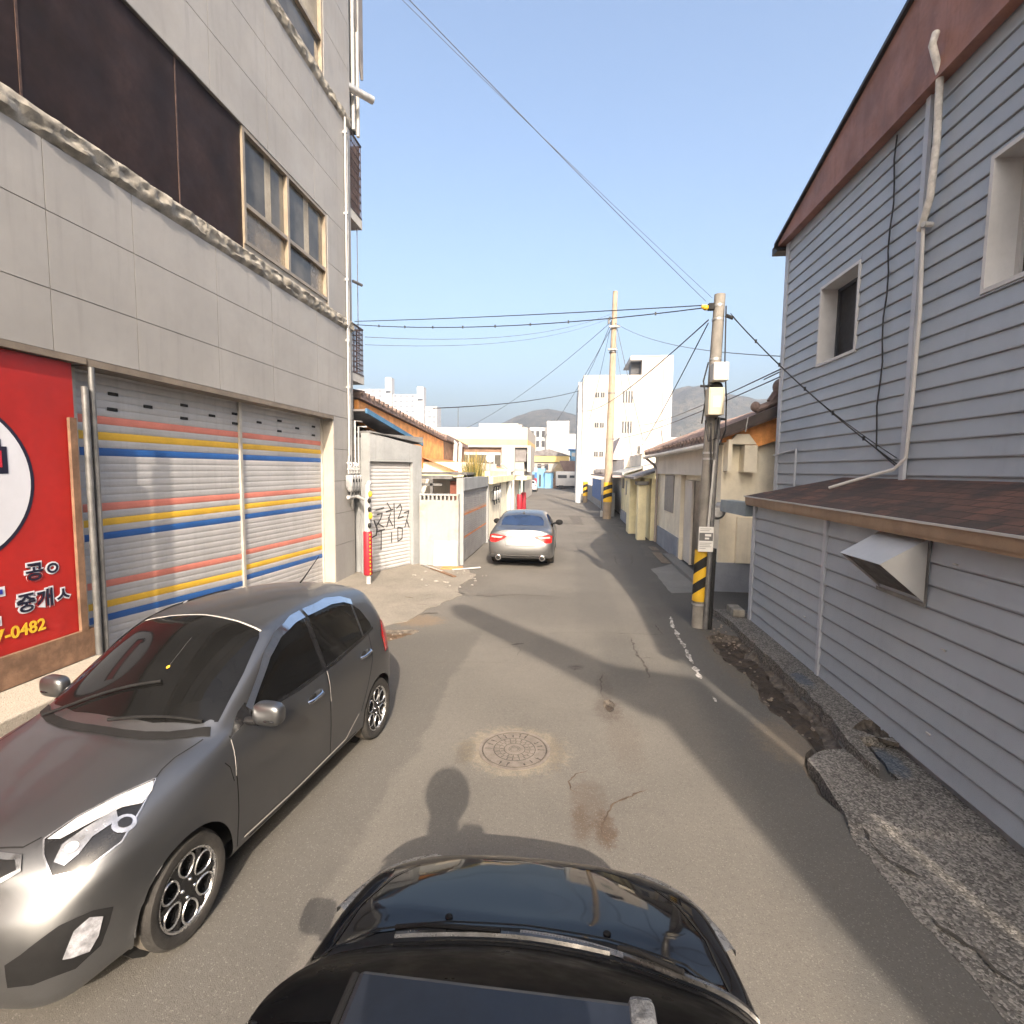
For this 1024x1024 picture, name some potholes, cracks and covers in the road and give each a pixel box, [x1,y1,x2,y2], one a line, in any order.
manhole cover [479,731,550,771]
pothole [706,633,842,804]
crack [606,624,663,677]
crack [568,771,647,841]
